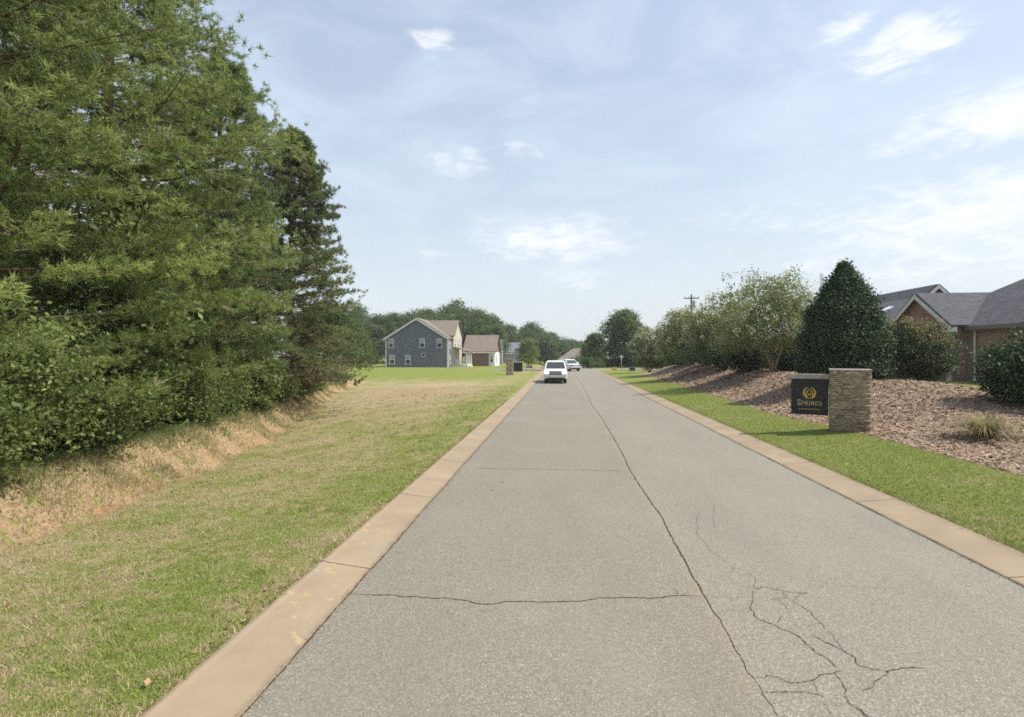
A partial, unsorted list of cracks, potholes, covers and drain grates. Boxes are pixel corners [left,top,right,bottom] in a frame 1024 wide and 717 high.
crack [358,376,919,717]
